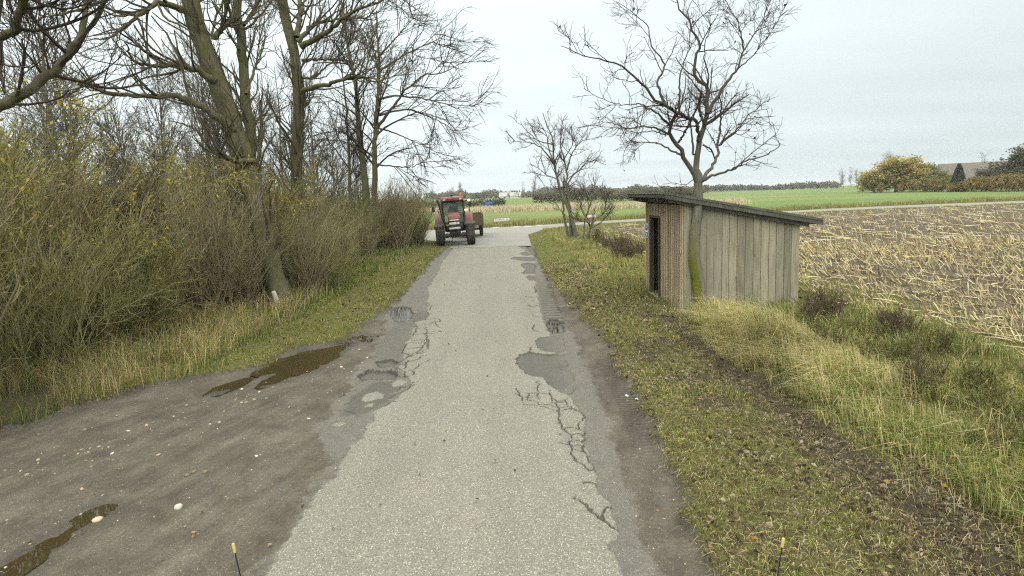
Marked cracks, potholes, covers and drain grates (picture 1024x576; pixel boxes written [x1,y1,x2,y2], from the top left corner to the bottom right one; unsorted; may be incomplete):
crack [380,305,441,408]
pothole [357,369,398,381]
pothole [375,359,399,368]
crack [515,380,619,532]
pothole [546,319,566,334]
